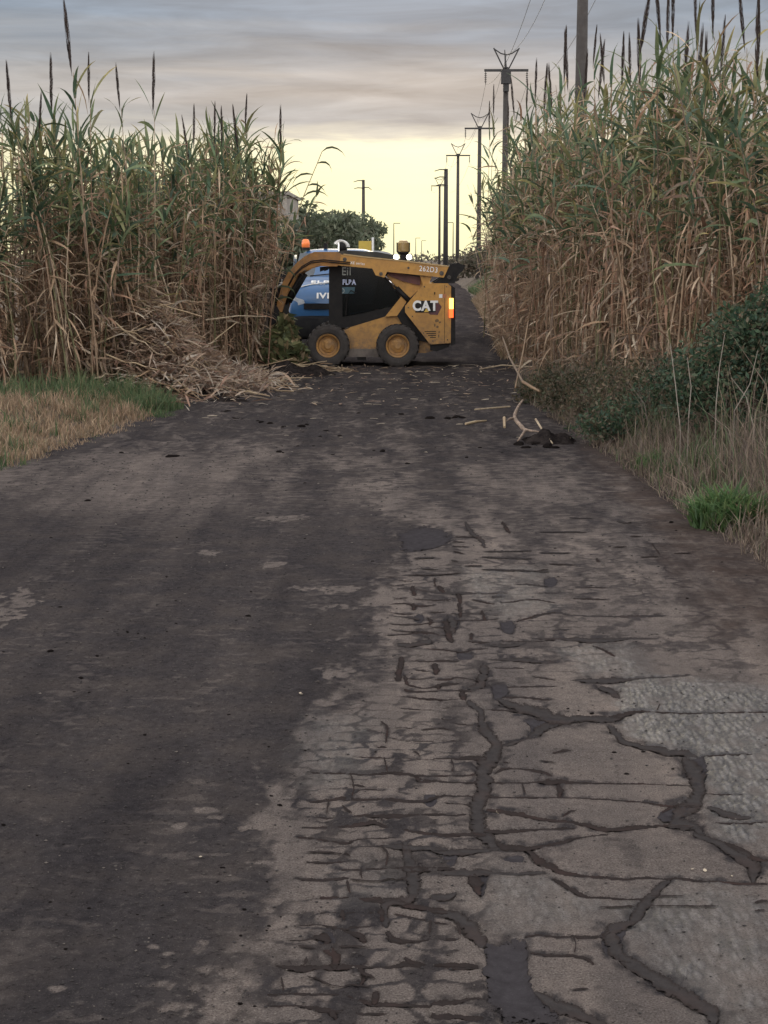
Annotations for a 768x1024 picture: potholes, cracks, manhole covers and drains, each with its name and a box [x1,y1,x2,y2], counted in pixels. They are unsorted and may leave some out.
crack [267,521,768,1024]
pothole [396,526,451,552]
pothole [481,938,559,1024]
